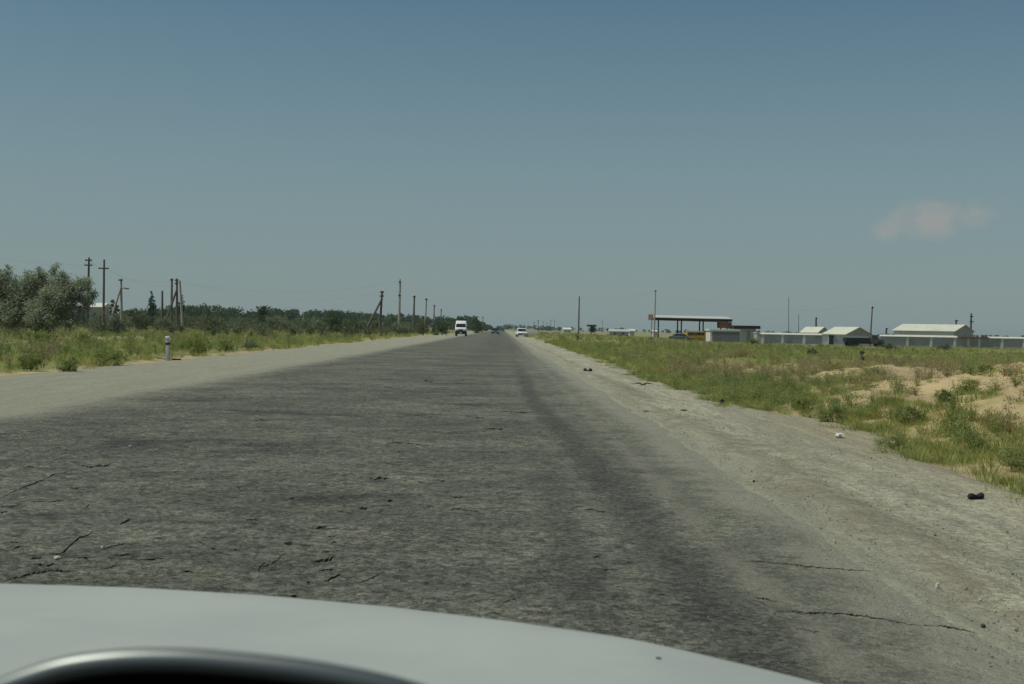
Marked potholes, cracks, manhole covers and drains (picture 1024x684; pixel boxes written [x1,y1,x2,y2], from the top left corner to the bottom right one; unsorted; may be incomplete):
crack [7,531,195,581]
crack [754,597,974,633]
crack [744,561,877,572]
crack [258,553,285,572]
crack [0,452,113,513]
crack [461,411,531,430]
crack [437,480,484,515]
crack [305,526,382,584]
